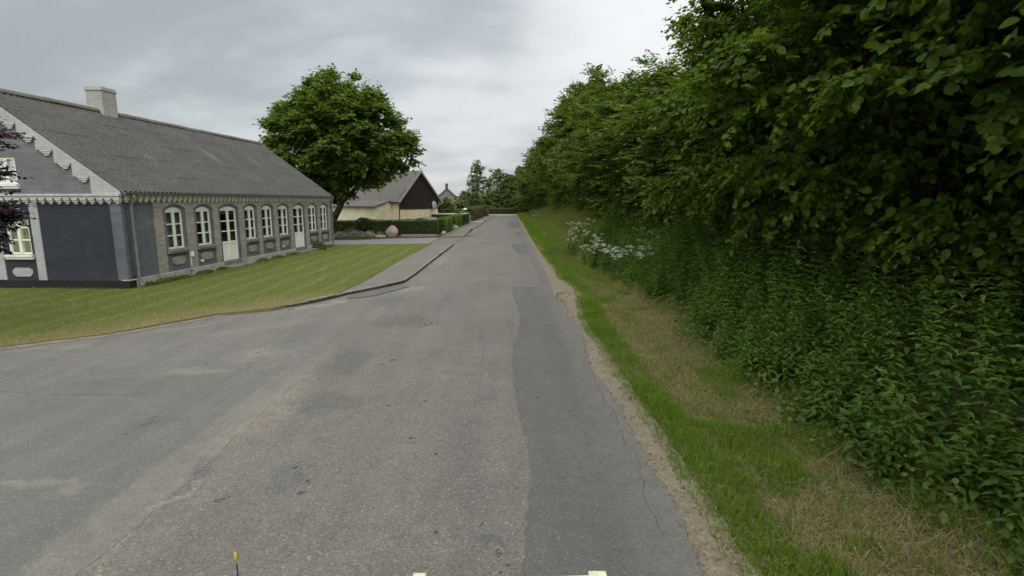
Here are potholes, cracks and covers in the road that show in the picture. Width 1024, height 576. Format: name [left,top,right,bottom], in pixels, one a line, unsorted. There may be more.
crack [594,376,665,540]
